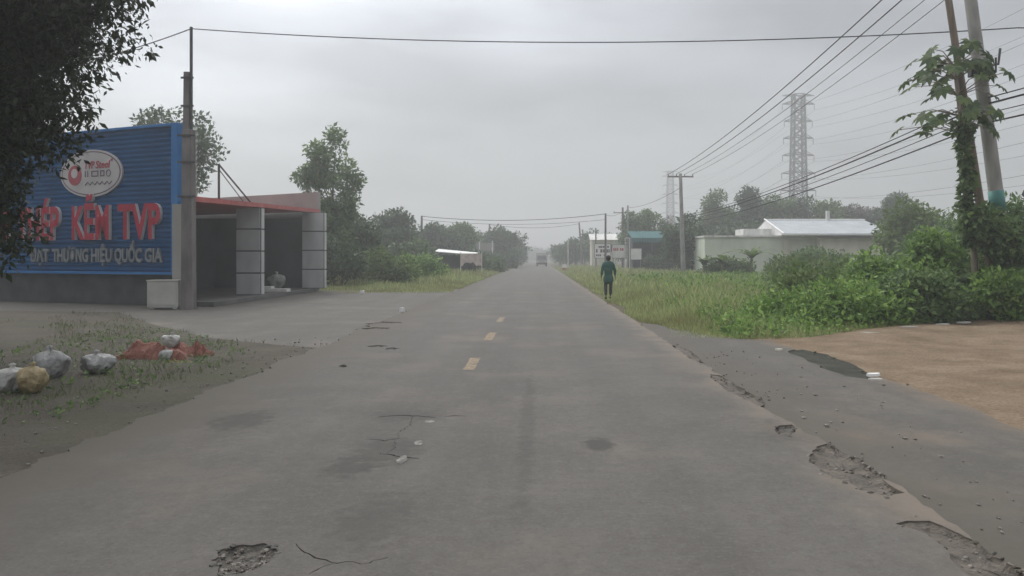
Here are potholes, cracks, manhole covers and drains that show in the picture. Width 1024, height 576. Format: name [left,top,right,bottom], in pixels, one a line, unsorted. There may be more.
crack [372,415,449,459]
pothole [774,425,797,437]
pothole [711,375,765,406]
pothole [900,515,1024,576]
pothole [807,441,900,499]
pothole [209,544,281,576]
